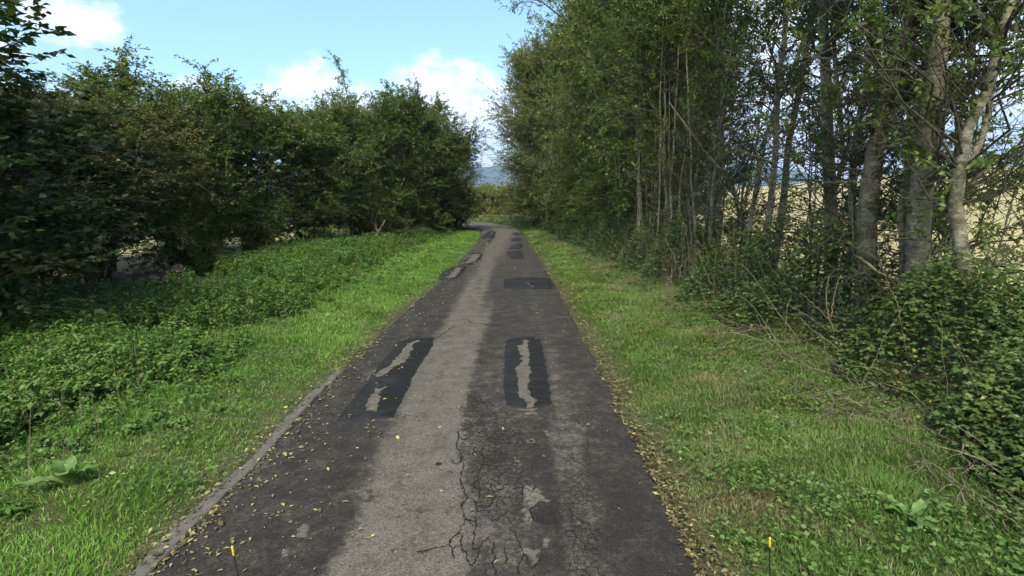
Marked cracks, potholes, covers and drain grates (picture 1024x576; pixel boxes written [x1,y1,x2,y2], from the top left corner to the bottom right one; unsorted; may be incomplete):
crack [416,391,542,575]
pothole [529,500,563,526]
crack [562,420,604,576]
